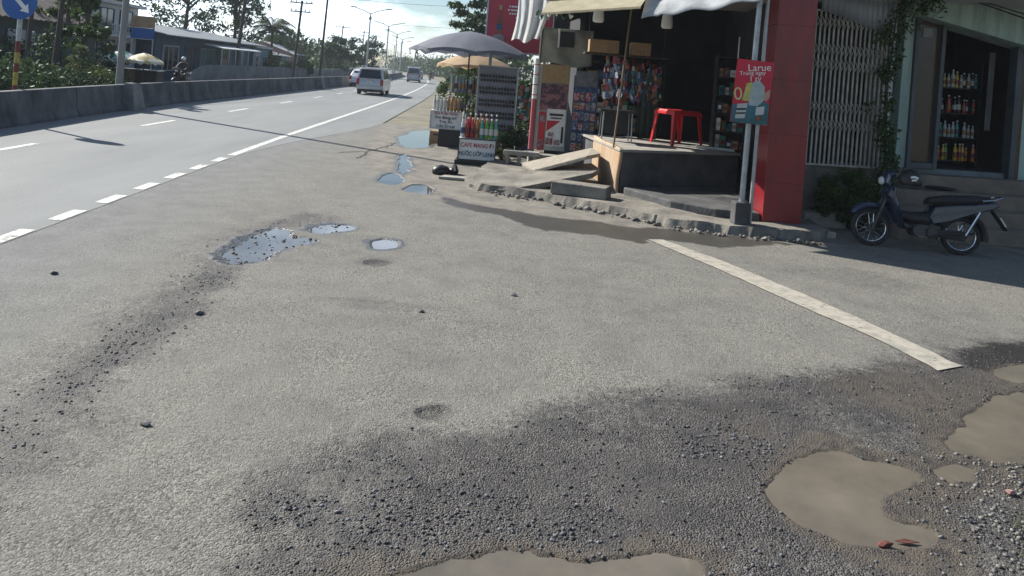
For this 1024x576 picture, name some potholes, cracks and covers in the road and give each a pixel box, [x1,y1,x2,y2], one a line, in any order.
pothole [990,363,1024,383]
pothole [757,448,939,551]
pothole [217,226,320,264]
pothole [305,223,359,234]
pothole [397,153,413,174]
pothole [380,545,710,576]
pothole [402,184,435,194]
pothole [940,389,1024,464]
pothole [396,130,436,148]
pothole [369,238,402,250]
pothole [377,173,405,185]
